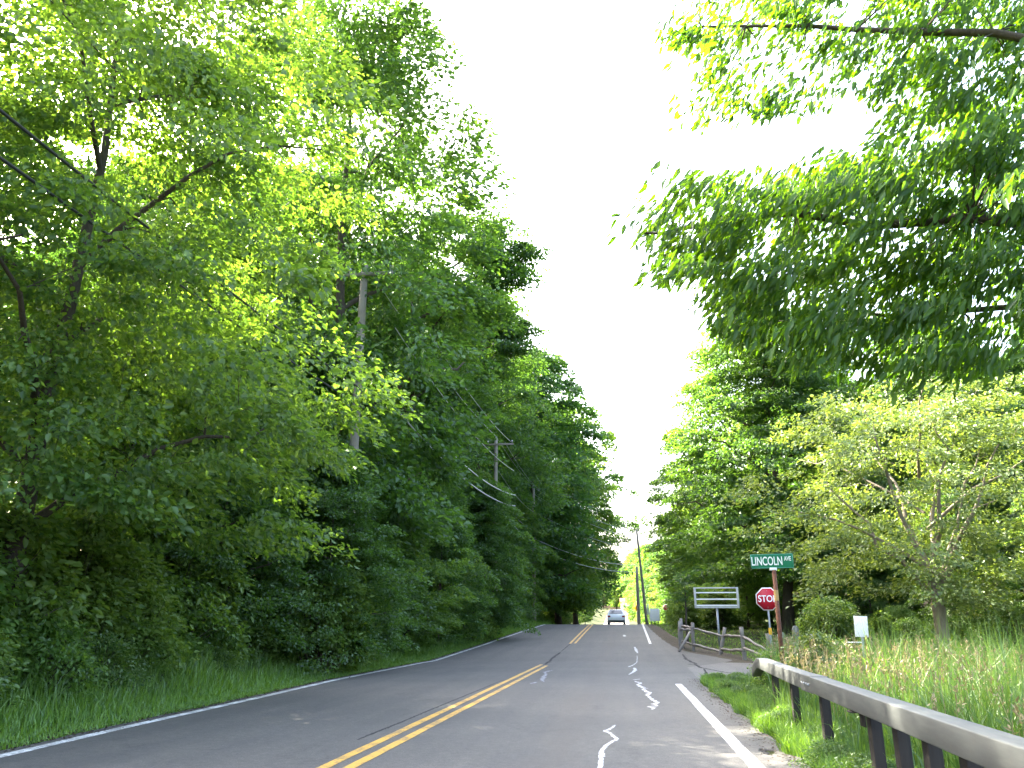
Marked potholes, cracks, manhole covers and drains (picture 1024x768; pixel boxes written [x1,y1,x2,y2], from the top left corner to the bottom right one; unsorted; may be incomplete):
crack [683,655,729,676]
